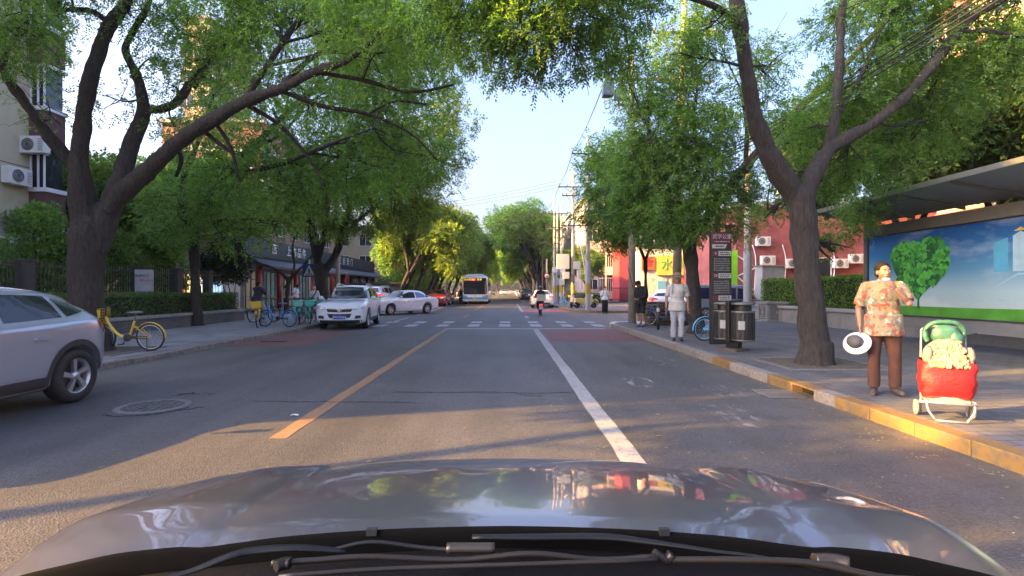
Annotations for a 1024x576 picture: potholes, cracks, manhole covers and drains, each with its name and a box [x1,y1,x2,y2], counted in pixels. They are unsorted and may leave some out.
manhole cover [112,399,192,414]
